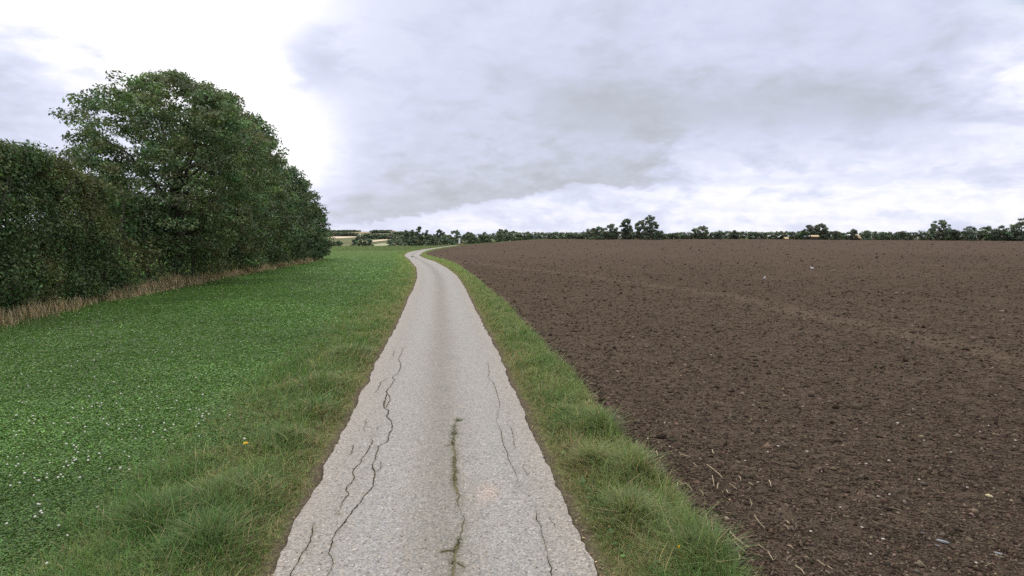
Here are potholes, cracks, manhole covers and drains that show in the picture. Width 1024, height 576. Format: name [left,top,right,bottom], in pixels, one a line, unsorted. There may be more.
crack [284,350,403,576]
crack [488,363,528,483]
crack [442,418,466,576]
